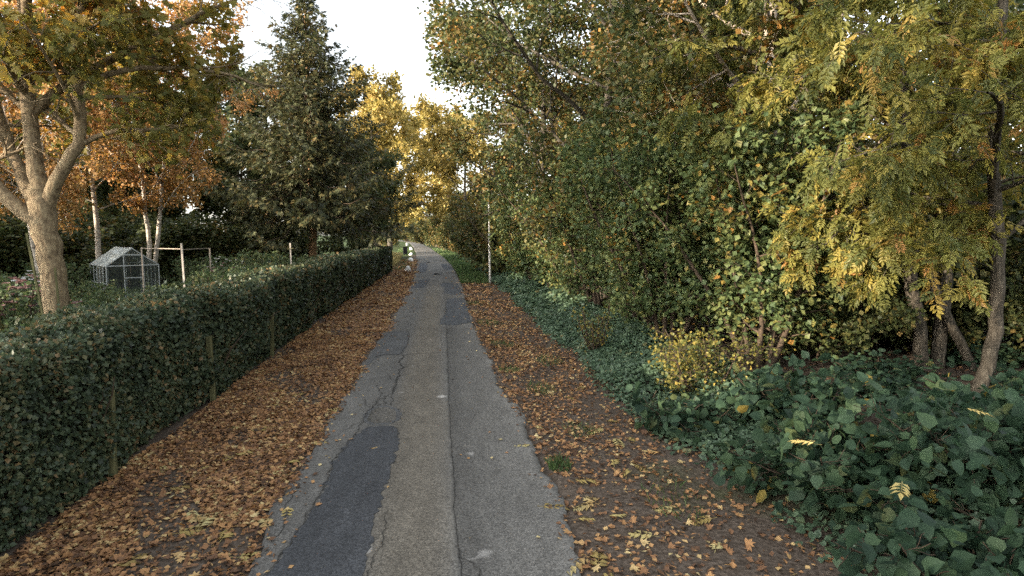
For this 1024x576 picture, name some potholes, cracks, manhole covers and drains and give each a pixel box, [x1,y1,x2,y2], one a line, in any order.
crack [263,331,443,576]
